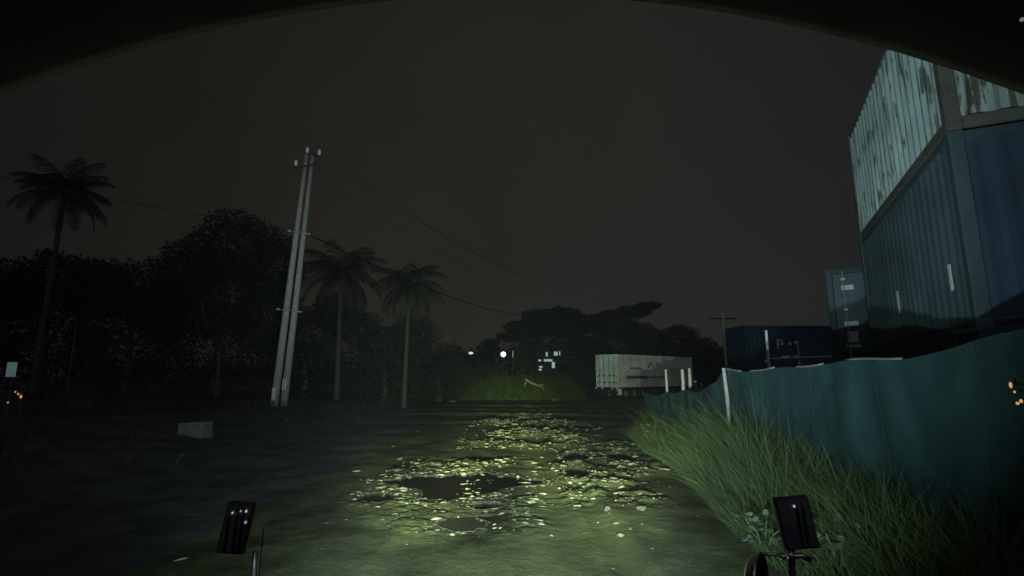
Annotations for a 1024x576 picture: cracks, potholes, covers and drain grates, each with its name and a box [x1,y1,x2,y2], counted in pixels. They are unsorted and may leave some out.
pothole [431,515,491,533]
pothole [353,490,403,503]
pothole [465,500,507,510]
pothole [560,449,594,461]
pothole [369,471,553,502]
pothole [561,462,592,478]
